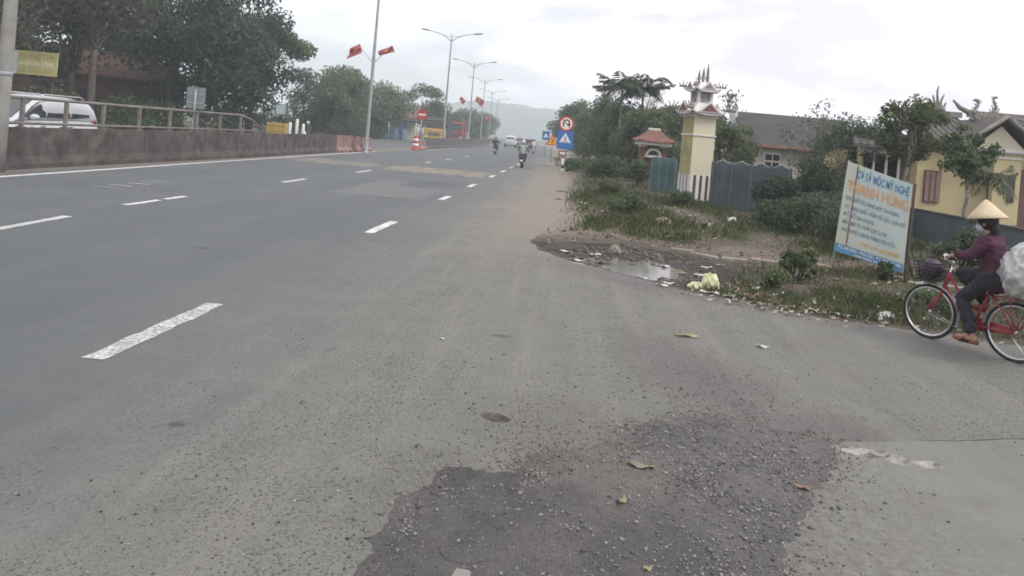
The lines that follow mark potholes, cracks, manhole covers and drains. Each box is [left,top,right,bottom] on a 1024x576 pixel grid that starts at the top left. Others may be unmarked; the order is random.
pothole [481,412,510,422]
pothole [353,416,838,576]
